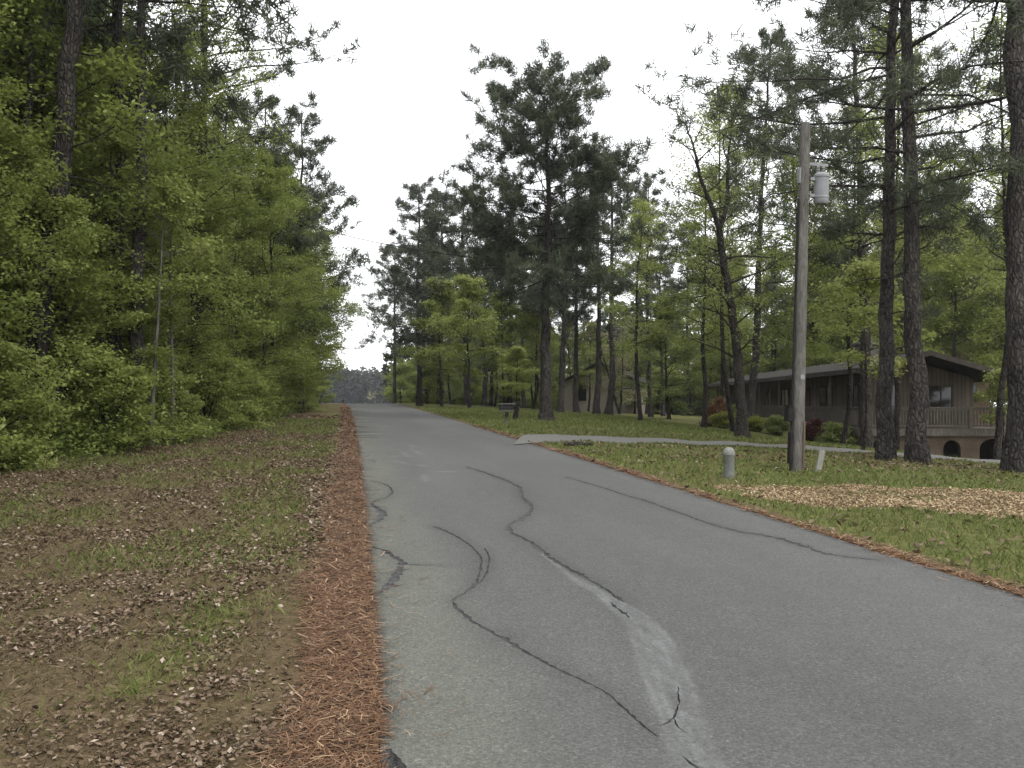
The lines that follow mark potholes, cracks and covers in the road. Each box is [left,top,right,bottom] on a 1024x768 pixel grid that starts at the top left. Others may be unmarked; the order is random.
crack [365,467,699,768]
